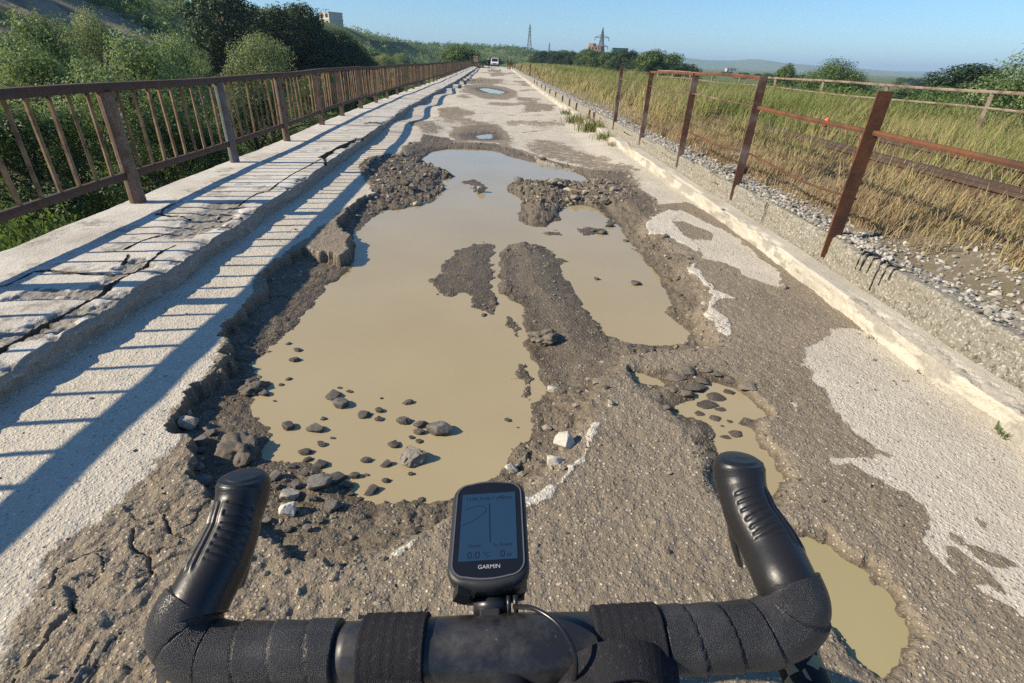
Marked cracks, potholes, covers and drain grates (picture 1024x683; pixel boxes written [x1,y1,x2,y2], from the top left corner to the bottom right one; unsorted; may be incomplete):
crack [10,549,123,683]
pothole [449,124,510,142]
pothole [465,85,517,99]
pothole [627,358,811,518]
pothole [163,135,727,571]
pothole [792,526,926,683]
